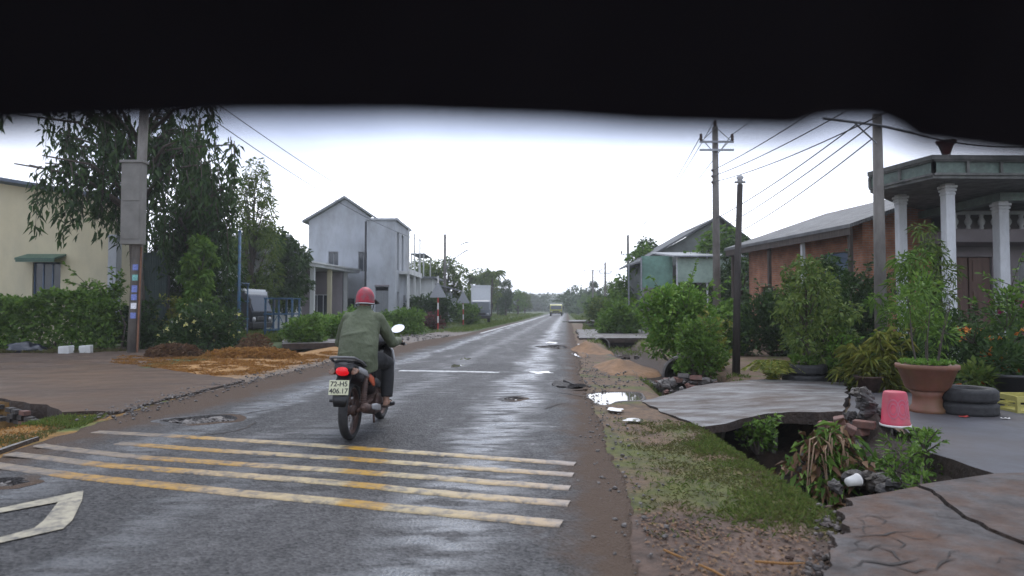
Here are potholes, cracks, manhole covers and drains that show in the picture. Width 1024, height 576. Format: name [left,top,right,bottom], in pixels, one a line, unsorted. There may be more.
pothole [151,414,246,426]
crack [848,513,1024,572]
pothole [0,474,44,490]
